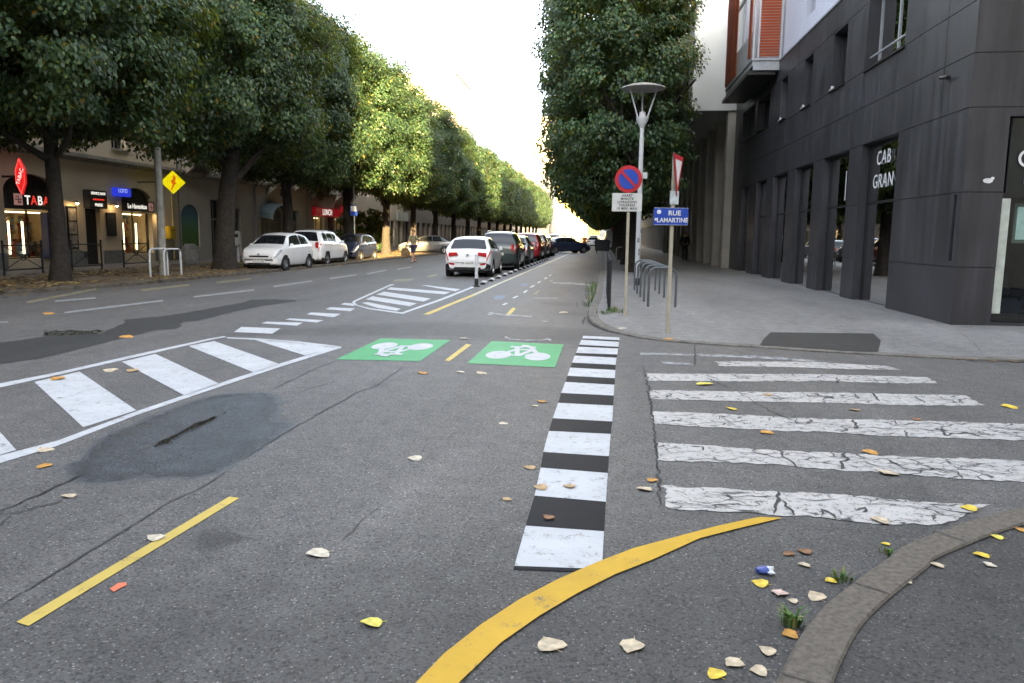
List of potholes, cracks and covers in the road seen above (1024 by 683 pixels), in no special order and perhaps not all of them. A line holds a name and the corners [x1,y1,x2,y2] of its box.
crack [242,362,406,459]
crack [0,472,87,525]
